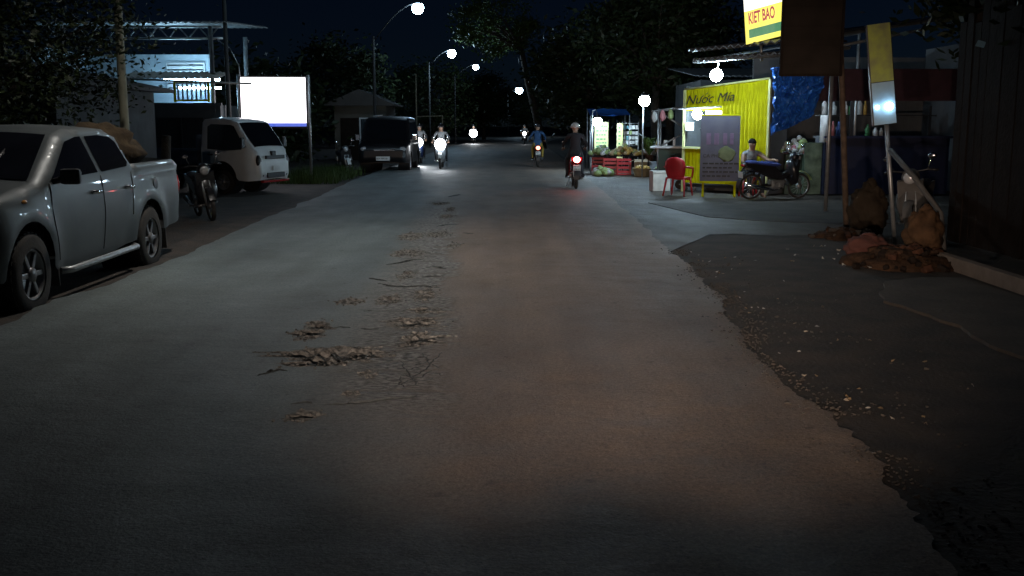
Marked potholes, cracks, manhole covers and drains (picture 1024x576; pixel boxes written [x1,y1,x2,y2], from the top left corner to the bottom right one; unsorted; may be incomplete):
pothole [252,345,399,367]
pothole [286,320,337,341]
pothole [332,297,364,305]
crack [369,259,446,288]
pothole [282,410,324,421]
pothole [398,331,454,348]
crack [291,352,442,405]
pothole [379,317,448,328]
